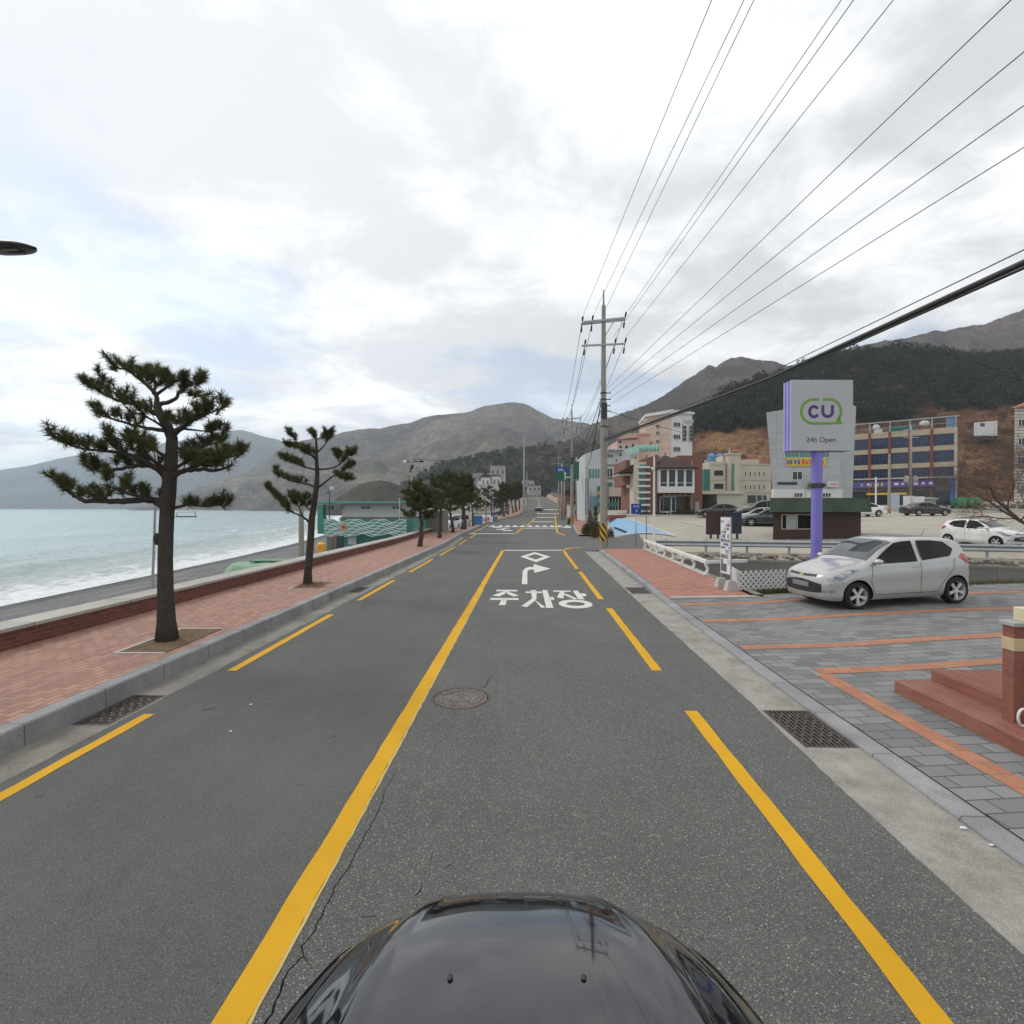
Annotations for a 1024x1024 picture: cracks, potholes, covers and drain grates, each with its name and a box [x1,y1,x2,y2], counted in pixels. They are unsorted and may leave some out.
drain grate [762,710,859,748]
manhole cover [431,687,490,709]
drain grate [72,695,166,725]
crack [263,770,402,1024]
